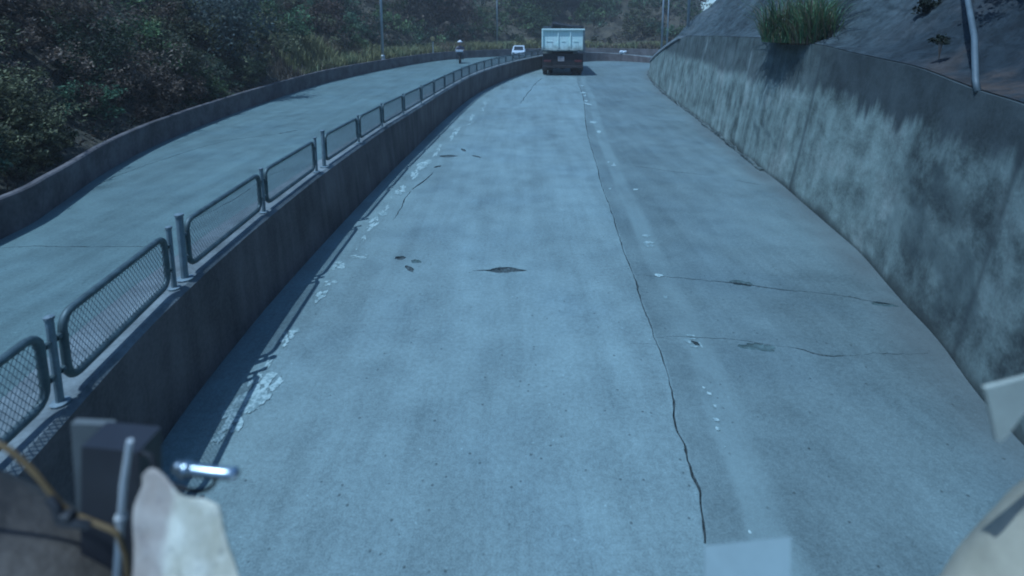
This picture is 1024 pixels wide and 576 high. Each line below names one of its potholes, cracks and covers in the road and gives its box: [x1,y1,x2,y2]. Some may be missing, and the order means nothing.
crack [656,336,924,357]
crack [636,274,889,305]
